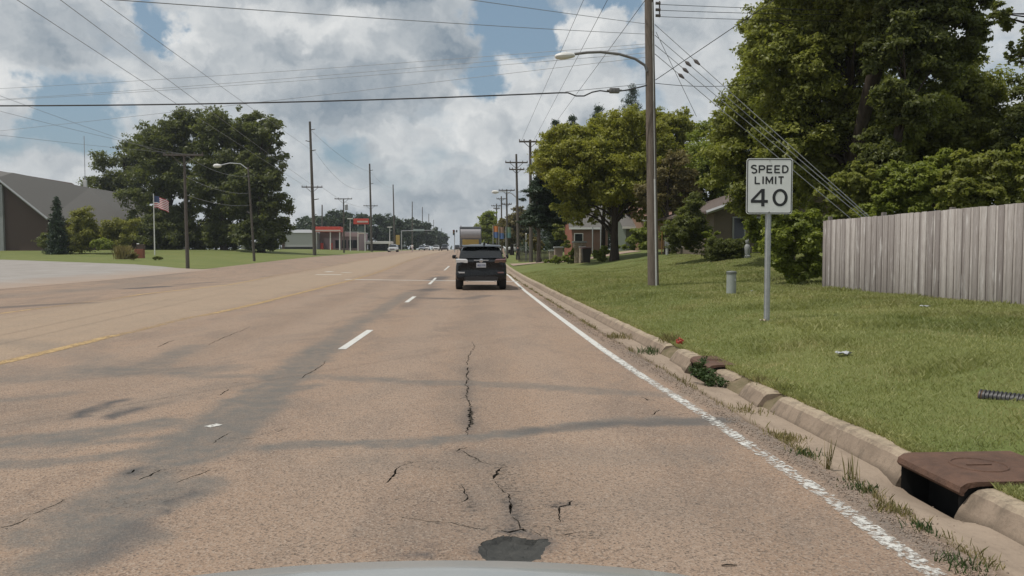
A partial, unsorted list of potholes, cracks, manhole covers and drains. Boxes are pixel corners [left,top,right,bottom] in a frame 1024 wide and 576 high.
crack [457,346,541,537]
drain grate [897,451,1024,519]
drain grate [690,356,736,383]
pothole [478,535,551,562]
